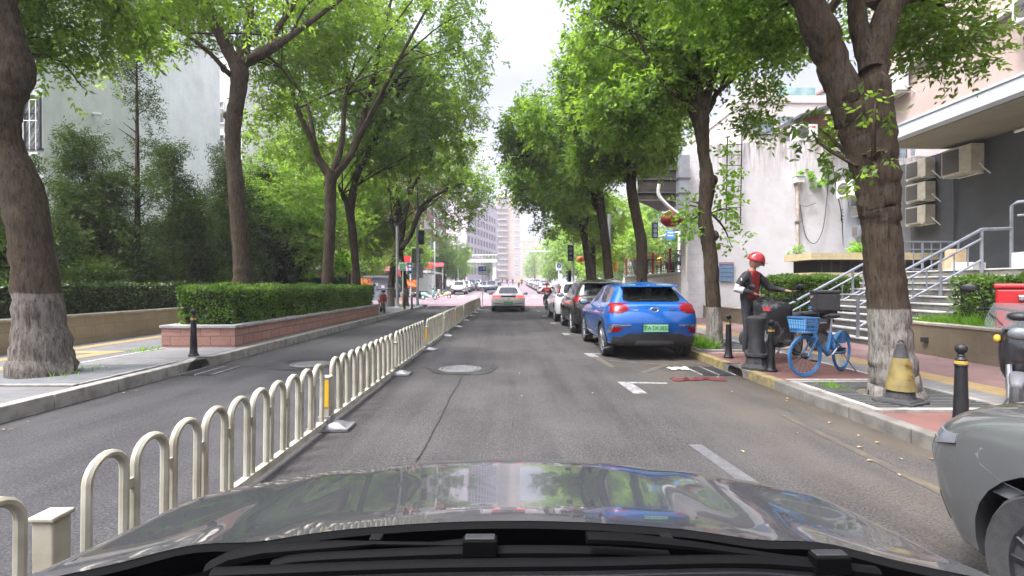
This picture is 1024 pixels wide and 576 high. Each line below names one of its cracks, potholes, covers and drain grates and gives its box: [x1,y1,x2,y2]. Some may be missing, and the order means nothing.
drain grate [688,366,736,376]
crack [415,320,498,462]
